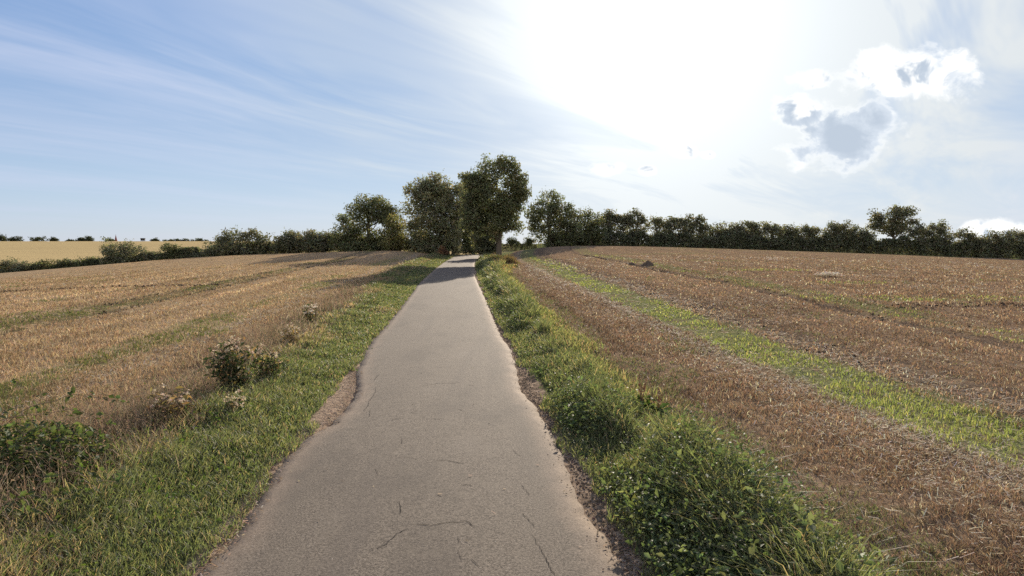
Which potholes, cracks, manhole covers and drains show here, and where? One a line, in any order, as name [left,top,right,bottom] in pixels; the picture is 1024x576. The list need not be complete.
crack [377,502,492,564]
